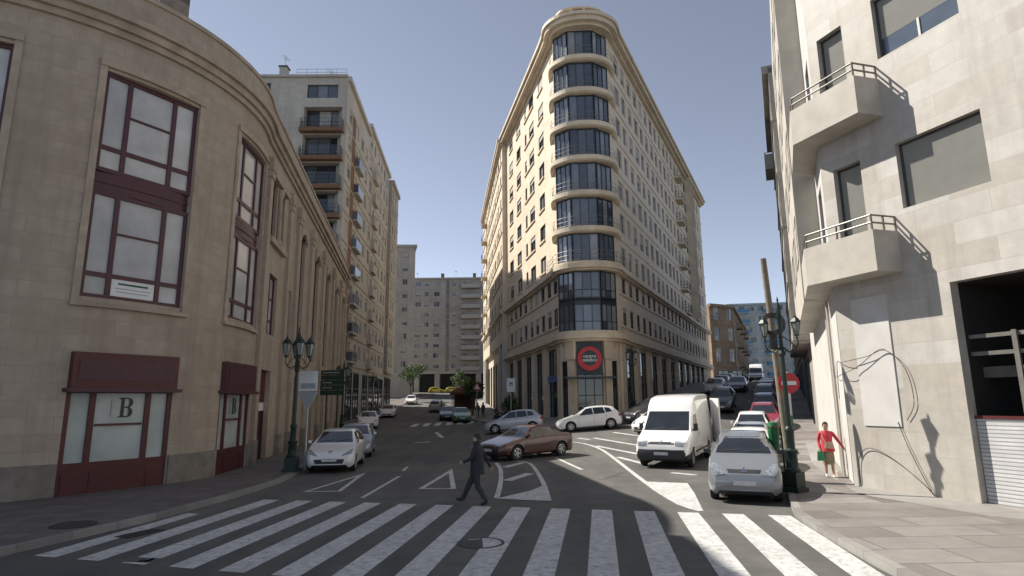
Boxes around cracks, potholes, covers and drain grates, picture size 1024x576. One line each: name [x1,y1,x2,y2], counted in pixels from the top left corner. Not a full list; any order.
manhole cover [457,537,505,549]
manhole cover [48,520,97,530]
